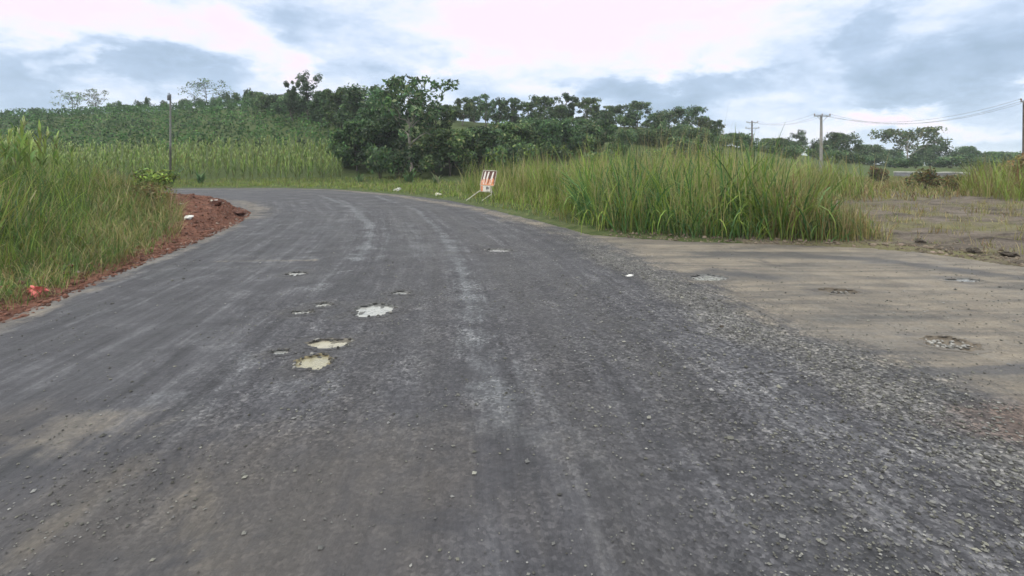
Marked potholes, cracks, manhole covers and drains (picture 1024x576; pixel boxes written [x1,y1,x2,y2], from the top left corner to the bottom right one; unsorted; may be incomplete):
pothole [299,336,361,351]
pothole [912,333,992,354]
pothole [286,351,341,372]
pothole [683,272,737,282]
pothole [284,308,323,316]
pothole [811,286,866,296]
pothole [347,301,406,319]
